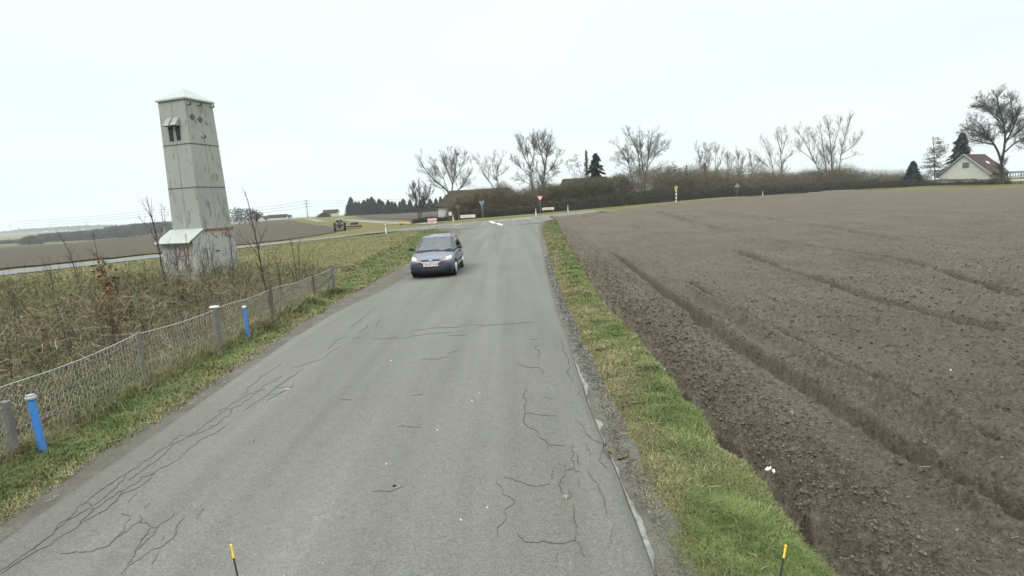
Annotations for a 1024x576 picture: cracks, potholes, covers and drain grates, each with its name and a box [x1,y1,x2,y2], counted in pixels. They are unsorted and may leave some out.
crack [497,391,607,557]
crack [2,306,543,574]
